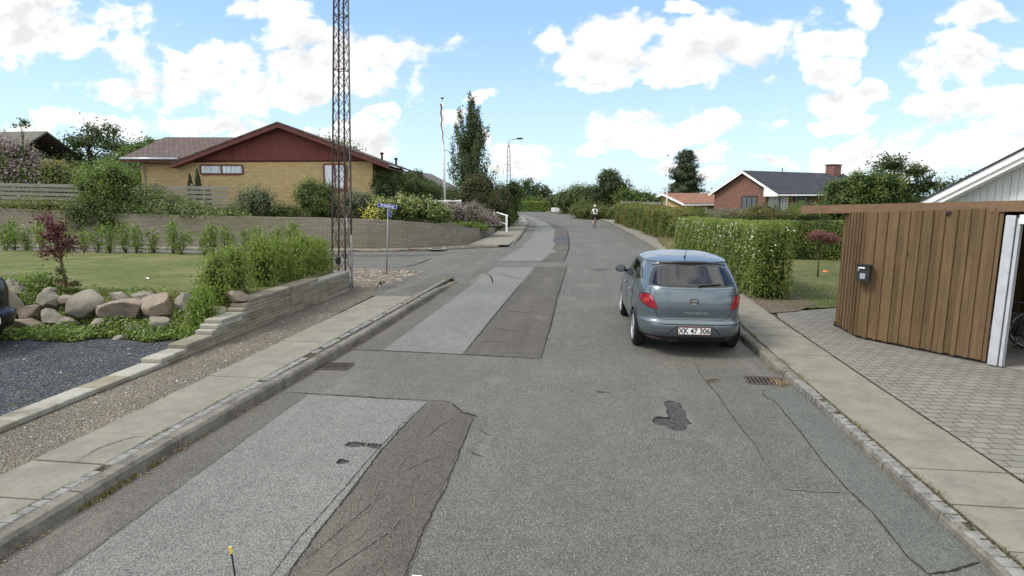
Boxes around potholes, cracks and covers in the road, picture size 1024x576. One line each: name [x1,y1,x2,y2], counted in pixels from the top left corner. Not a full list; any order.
pothole [345,441,382,449]
crack [695,364,765,462]
pothole [652,400,691,431]
drain grate [743,375,789,387]
crack [271,391,490,576]
drain grate [315,362,354,371]
